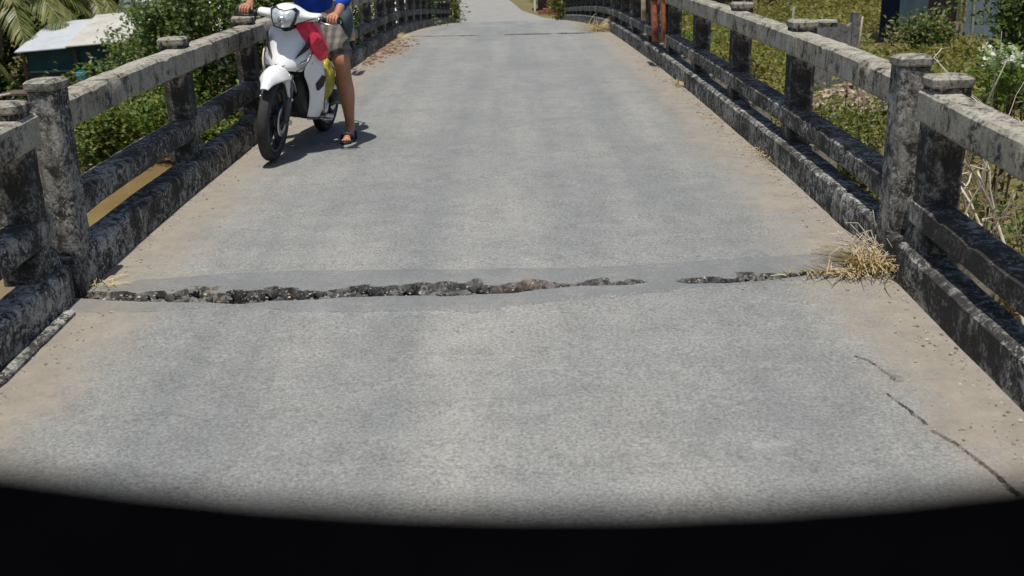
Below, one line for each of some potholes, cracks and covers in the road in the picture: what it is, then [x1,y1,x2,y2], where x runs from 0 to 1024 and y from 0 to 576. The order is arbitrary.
crack [855,356,1006,482]
